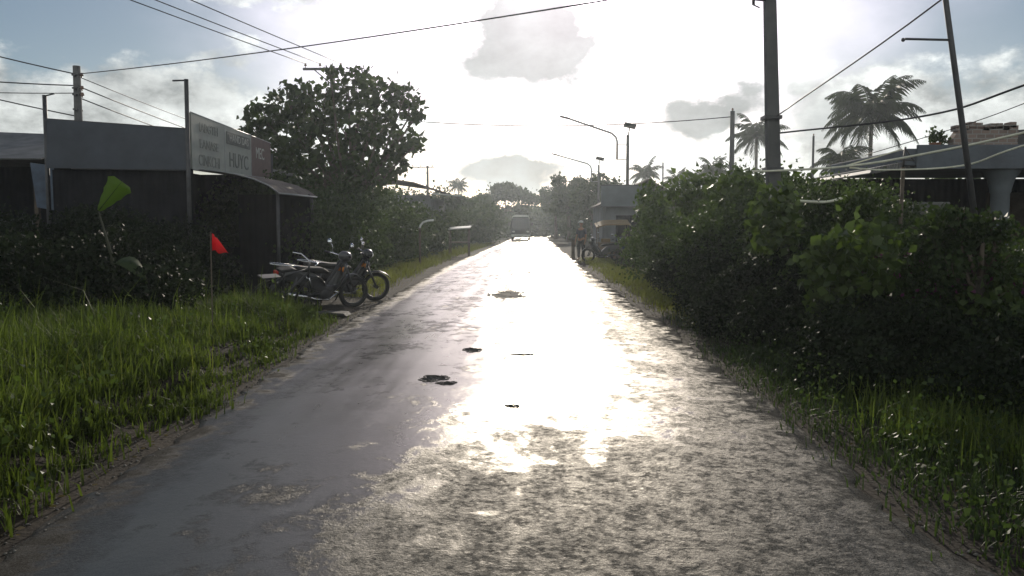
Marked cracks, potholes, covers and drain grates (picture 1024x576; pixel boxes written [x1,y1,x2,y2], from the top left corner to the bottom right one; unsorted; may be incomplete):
pothole [487,290,527,299]
